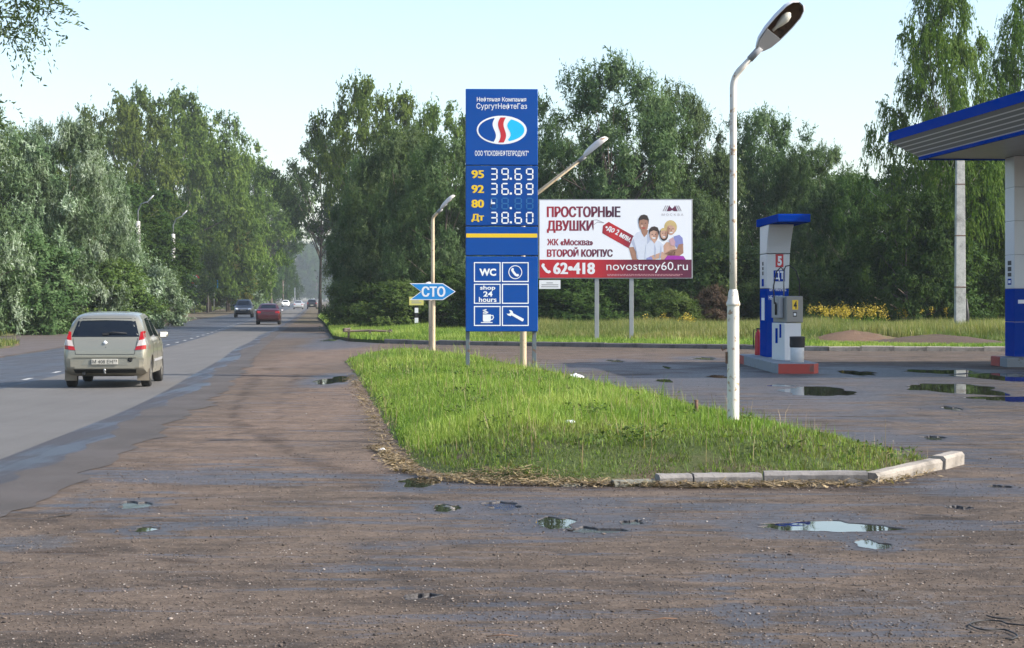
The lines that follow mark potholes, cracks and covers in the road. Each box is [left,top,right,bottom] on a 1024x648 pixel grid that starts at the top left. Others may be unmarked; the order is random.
pothole [754,519,917,533]
pothole [773,386,859,396]
pothole [852,539,893,550]
pothole [904,383,1015,396]
pothole [534,516,579,530]
pothole [116,500,155,509]
pothole [310,375,352,385]
pothole [479,501,524,511]
pothole [396,476,444,489]
pothole [432,503,463,513]
